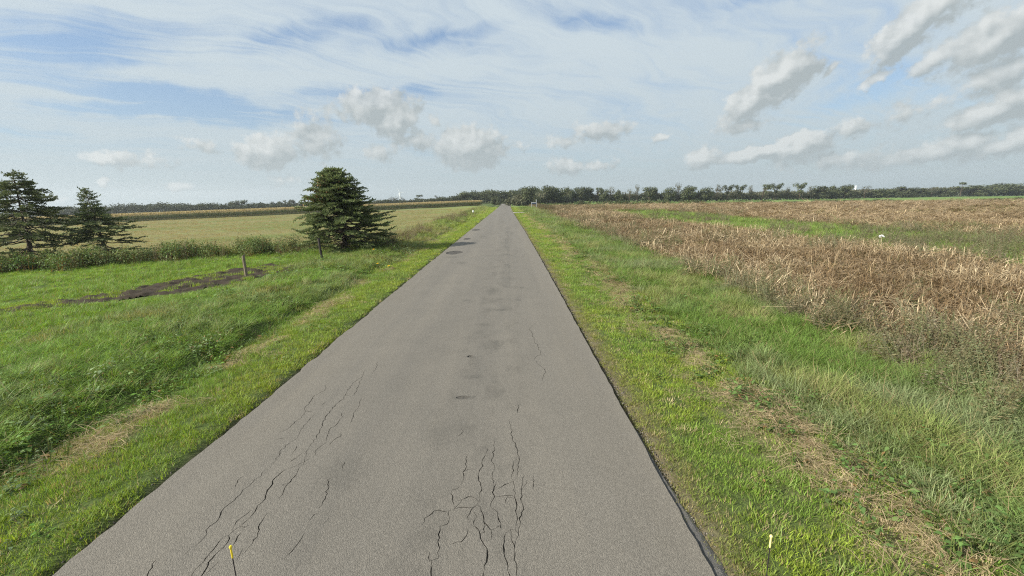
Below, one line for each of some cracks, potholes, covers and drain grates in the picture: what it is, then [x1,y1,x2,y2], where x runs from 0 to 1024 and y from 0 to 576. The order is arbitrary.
crack [424,422,534,576]
crack [192,366,377,576]
